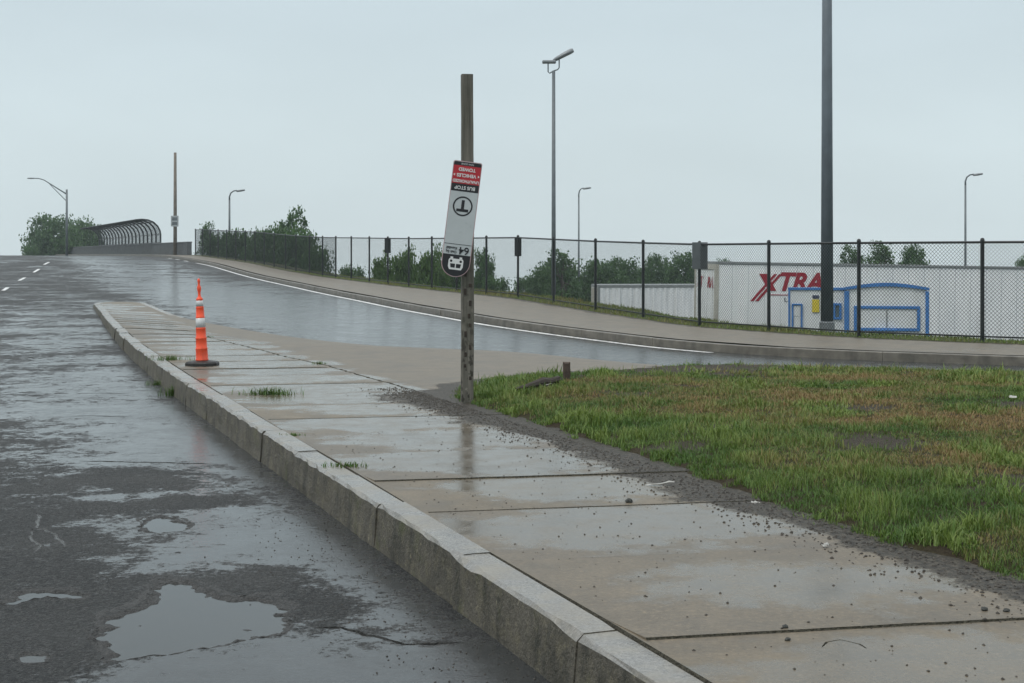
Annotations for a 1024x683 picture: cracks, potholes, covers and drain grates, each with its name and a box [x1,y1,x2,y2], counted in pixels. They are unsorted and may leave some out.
crack [315,627,459,645]
pothole [86,574,301,663]
crack [29,513,91,553]
pothole [135,515,195,533]
